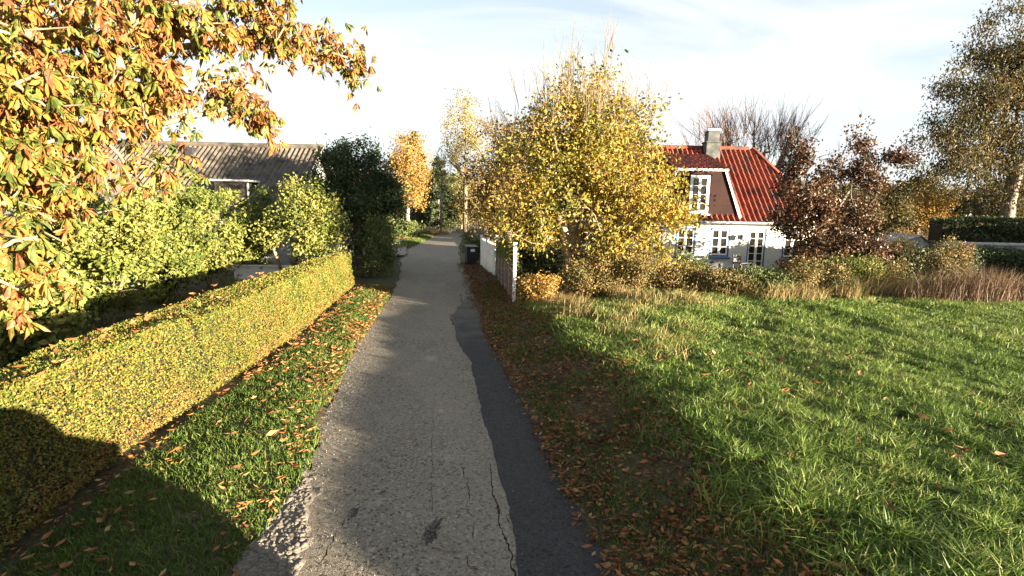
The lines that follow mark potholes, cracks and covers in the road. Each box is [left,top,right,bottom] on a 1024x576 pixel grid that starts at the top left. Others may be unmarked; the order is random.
crack [461,463,517,576]
